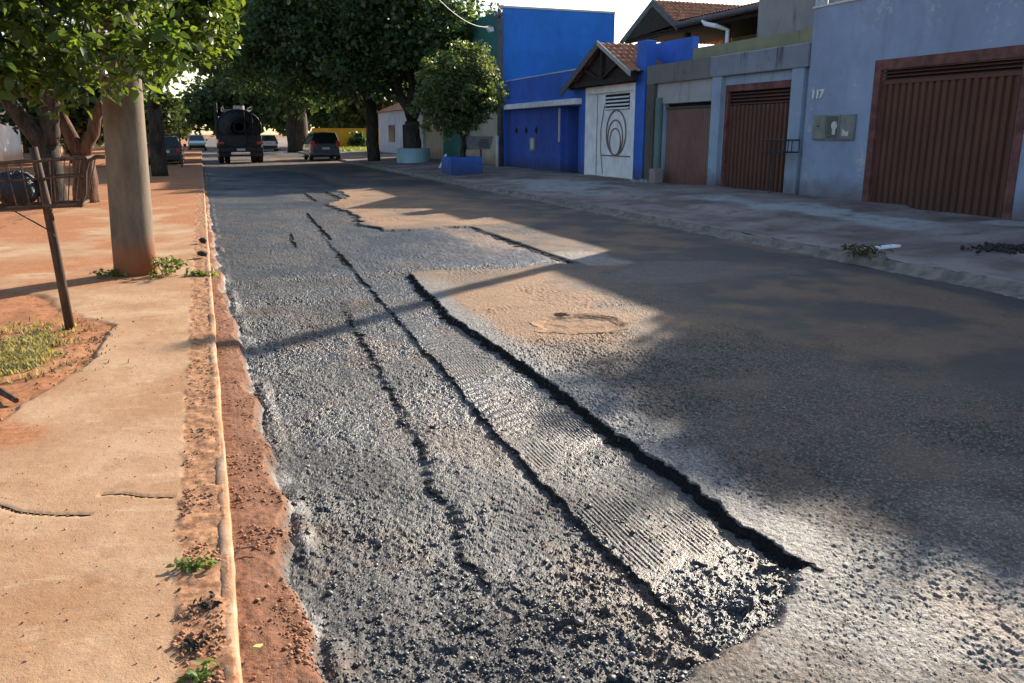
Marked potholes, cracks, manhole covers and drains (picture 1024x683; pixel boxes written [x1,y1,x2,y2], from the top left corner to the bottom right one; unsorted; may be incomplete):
crack [289,192,824,624]
crack [0,505,90,517]
